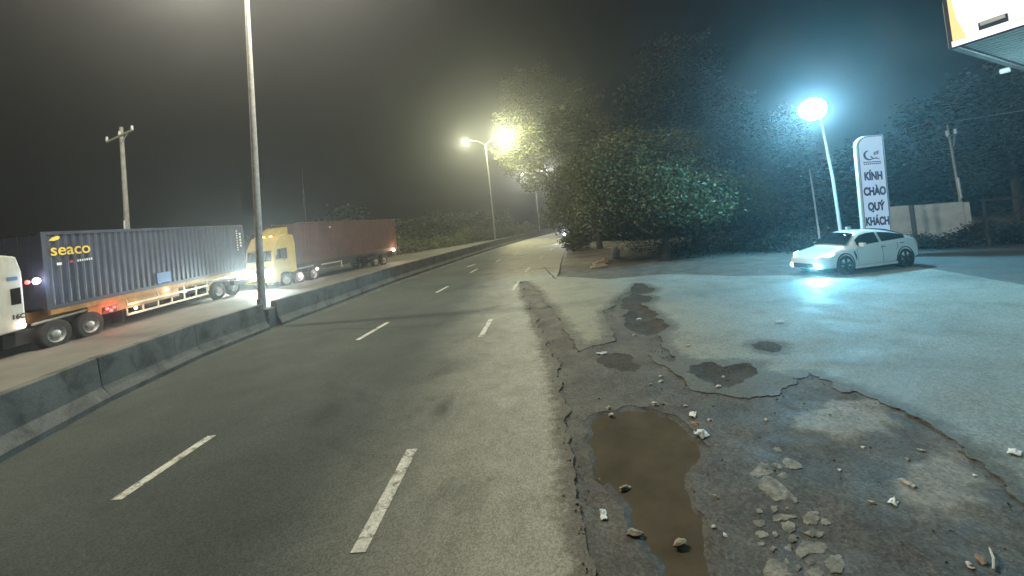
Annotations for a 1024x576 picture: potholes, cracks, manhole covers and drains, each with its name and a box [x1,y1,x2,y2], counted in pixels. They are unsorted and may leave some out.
pothole [580,405,718,576]
